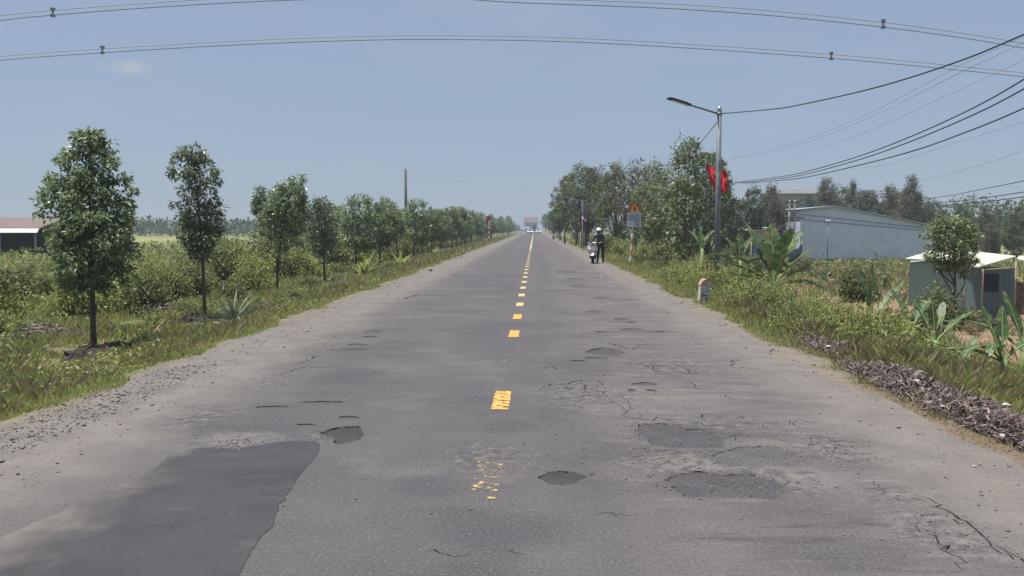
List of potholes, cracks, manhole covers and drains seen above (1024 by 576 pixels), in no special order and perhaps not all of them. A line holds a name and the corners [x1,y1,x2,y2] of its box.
crack [540,367,674,454]
crack [868,481,1024,571]
pothole [665,471,782,500]
pothole [320,426,364,445]
pothole [586,347,625,356]
pothole [537,471,587,486]
crack [609,343,698,389]
